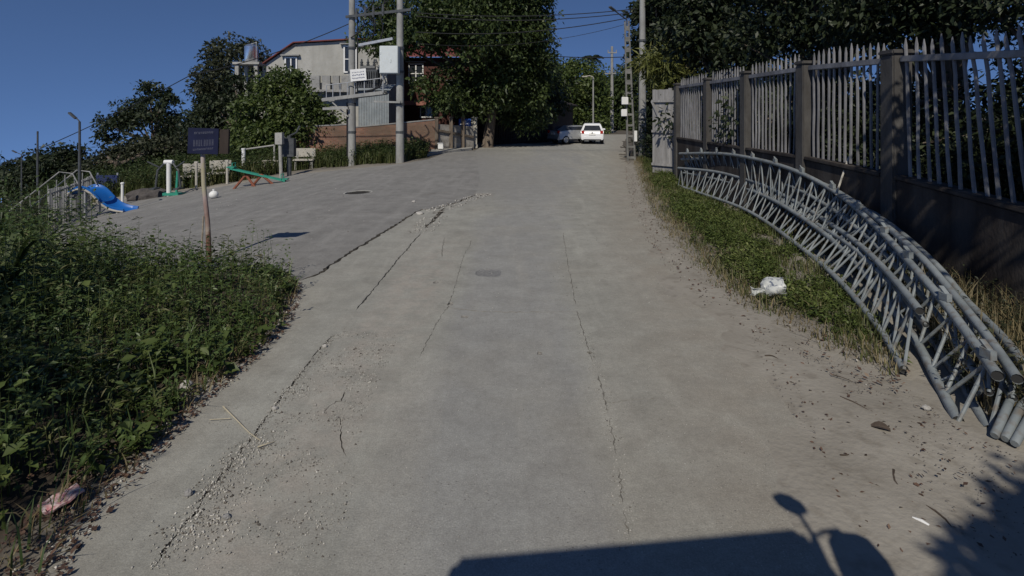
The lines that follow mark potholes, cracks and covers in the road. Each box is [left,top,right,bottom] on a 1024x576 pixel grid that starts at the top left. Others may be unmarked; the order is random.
crack [153,338,330,568]
crack [325,392,346,455]
crack [300,192,475,310]
